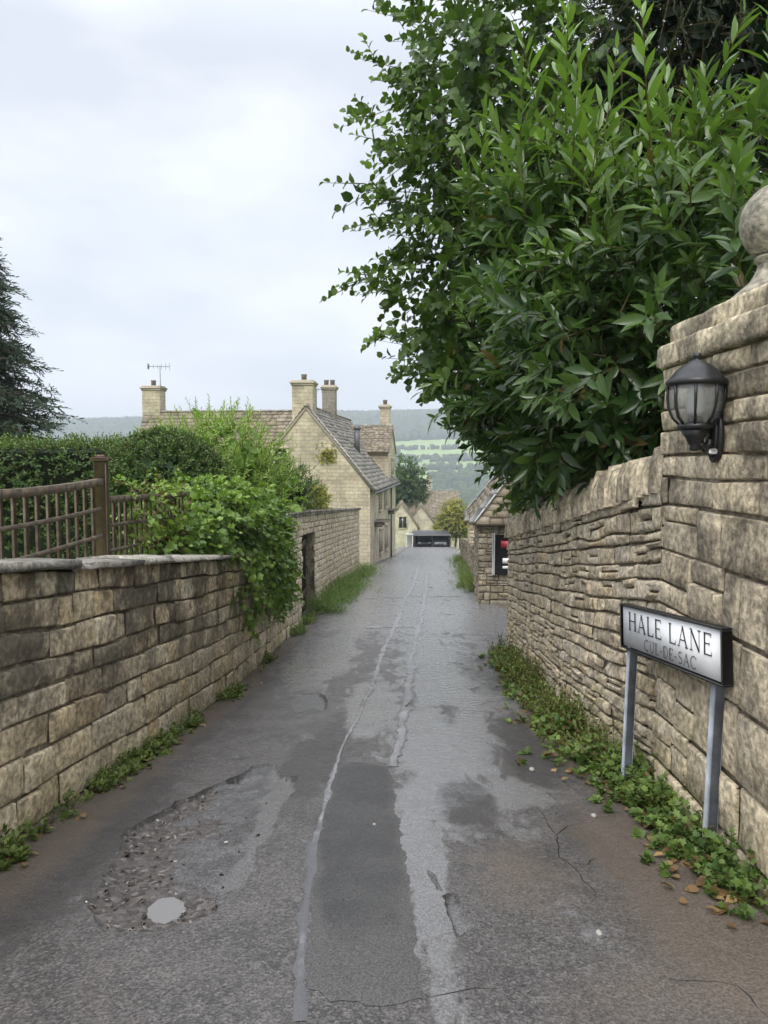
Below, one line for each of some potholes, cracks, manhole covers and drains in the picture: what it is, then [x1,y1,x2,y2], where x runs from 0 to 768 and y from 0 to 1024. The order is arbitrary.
crack [658,976,765,1015]
crack [426,985,515,998]
pothole [84,763,299,935]
crack [536,806,596,900]
